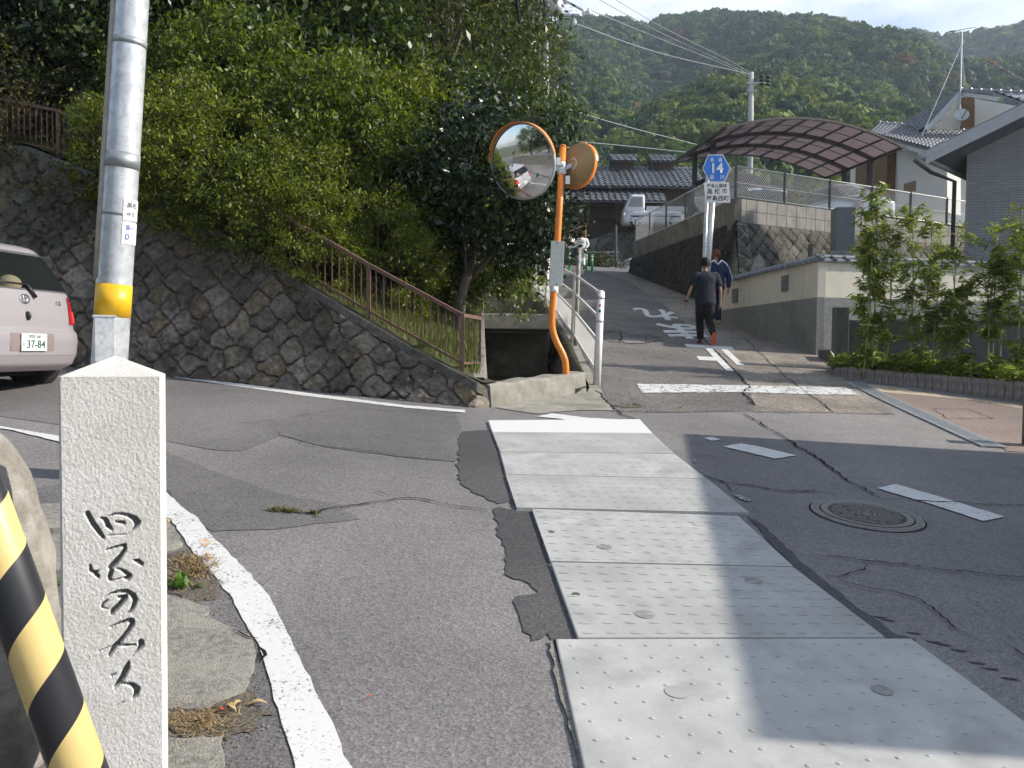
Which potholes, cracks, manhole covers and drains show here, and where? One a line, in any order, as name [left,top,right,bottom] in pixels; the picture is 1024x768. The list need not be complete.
crack [805,553,1024,638]
crack [708,413,1024,505]
manhole cover [809,498,927,532]
